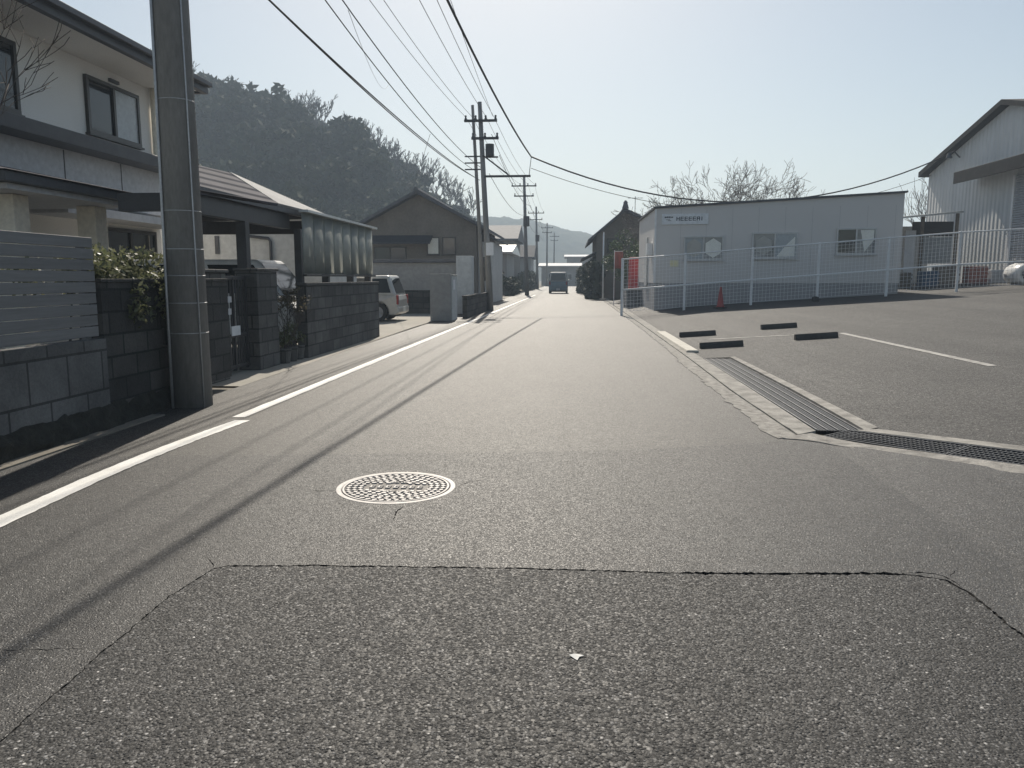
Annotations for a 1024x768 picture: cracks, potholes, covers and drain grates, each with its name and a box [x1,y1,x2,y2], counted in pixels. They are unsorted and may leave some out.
drain grate [703,358,860,435]
crack [0,559,1024,742]
manhole cover [336,472,456,504]
drain grate [823,430,1024,465]
